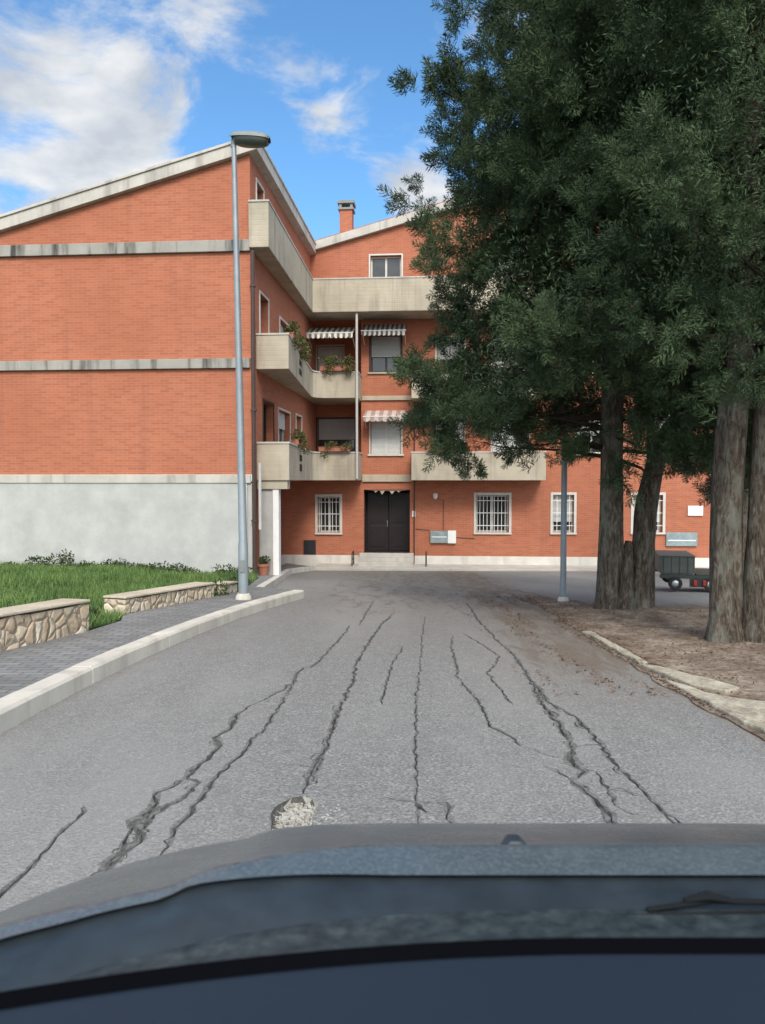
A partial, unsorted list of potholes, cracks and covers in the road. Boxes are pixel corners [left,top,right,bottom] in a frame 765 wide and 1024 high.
crack [0,595,681,899]
pothole [270,796,340,830]
